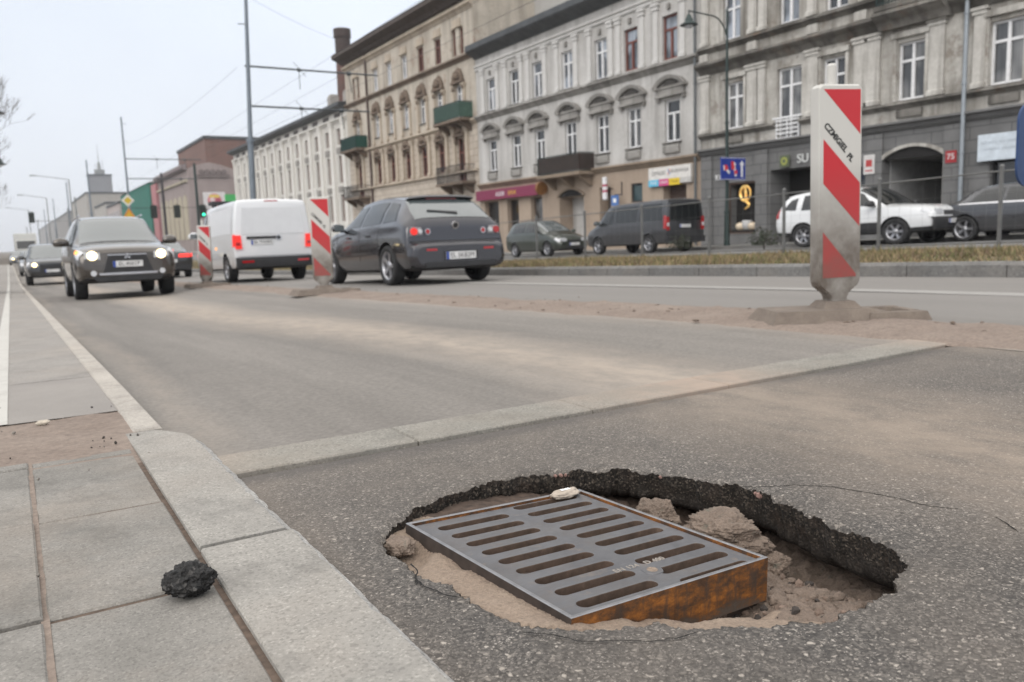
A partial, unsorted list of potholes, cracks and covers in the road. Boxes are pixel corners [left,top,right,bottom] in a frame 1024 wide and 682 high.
crack [410,563,459,598]
crack [740,484,952,509]
crack [522,632,696,642]
drain grate [406,489,768,625]
